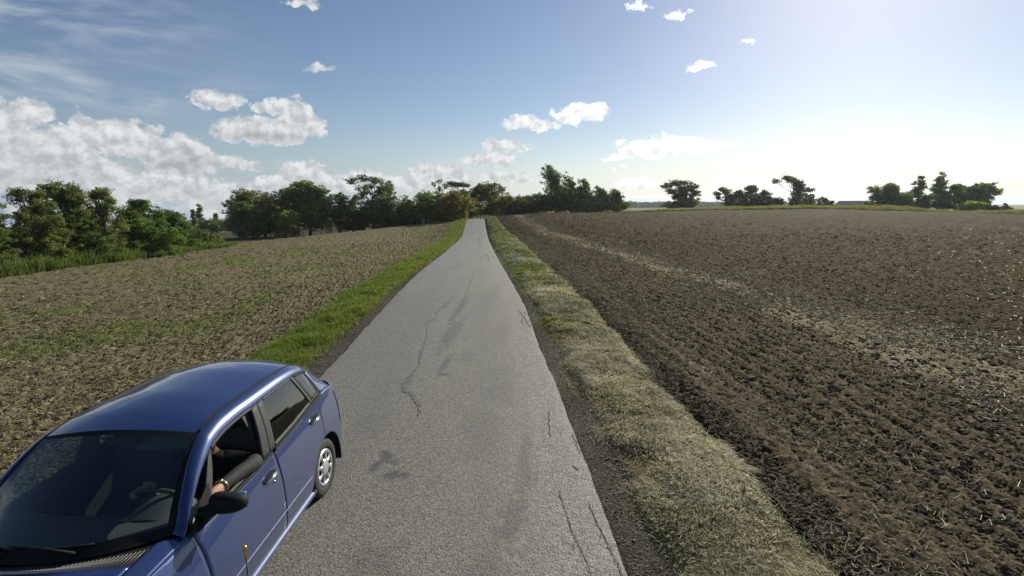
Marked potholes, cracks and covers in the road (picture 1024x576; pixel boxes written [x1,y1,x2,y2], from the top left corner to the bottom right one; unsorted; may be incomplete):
crack [559,492,624,576]
